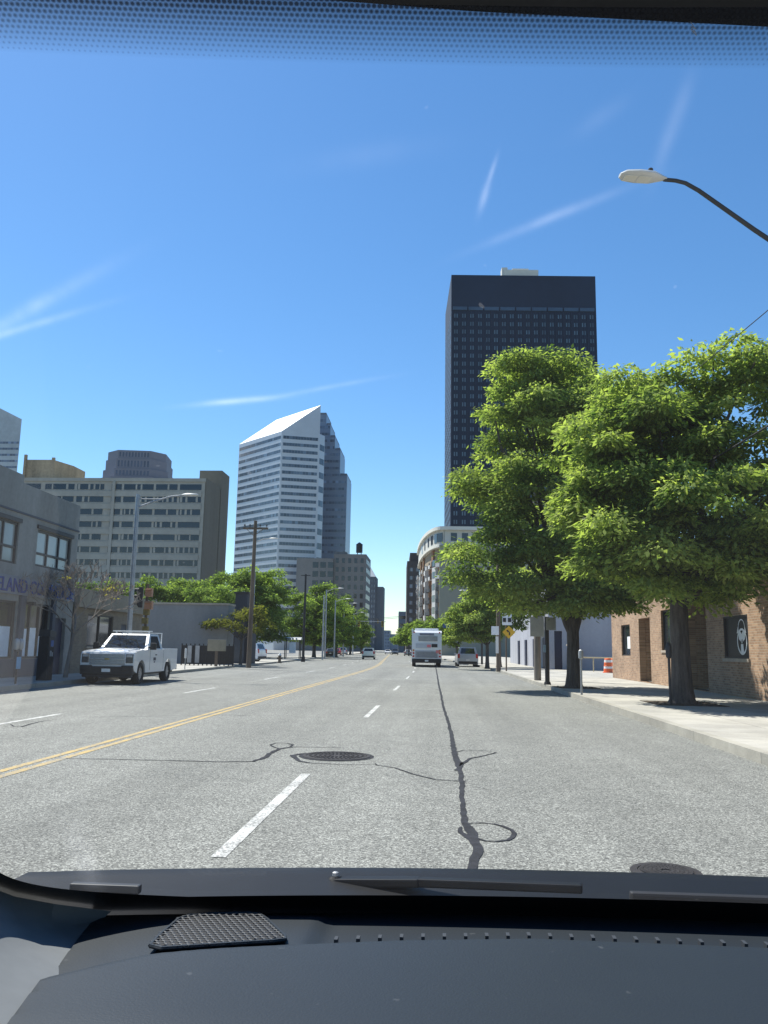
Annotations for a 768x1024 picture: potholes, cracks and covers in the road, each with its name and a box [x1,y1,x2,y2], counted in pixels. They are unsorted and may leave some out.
manhole cover [290,751,374,765]
manhole cover [630,862,703,875]
